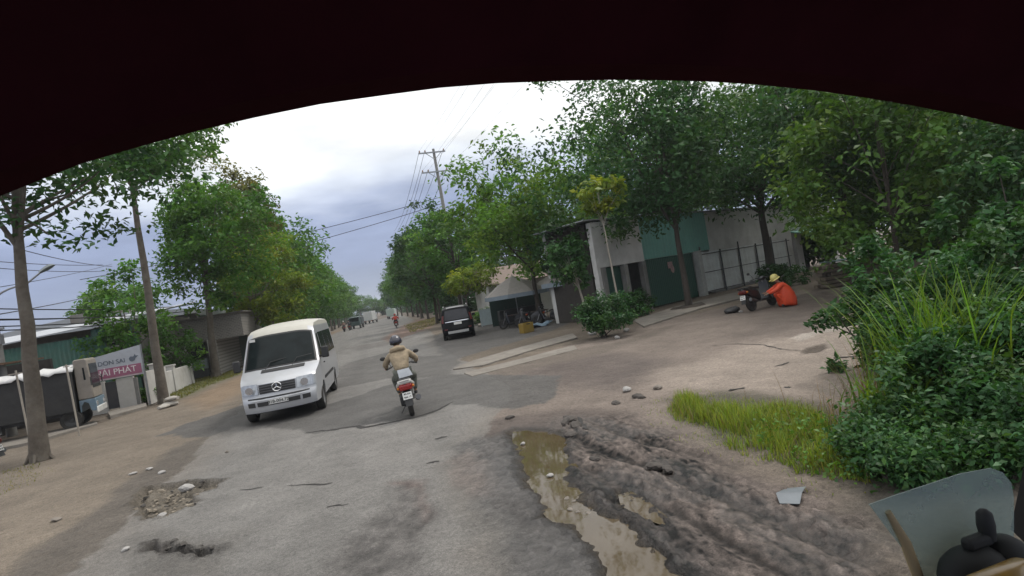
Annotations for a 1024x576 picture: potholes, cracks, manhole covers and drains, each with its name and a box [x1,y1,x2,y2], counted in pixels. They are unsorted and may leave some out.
pothole [499,426,701,576]
pothole [132,538,234,561]
pothole [119,477,233,522]
